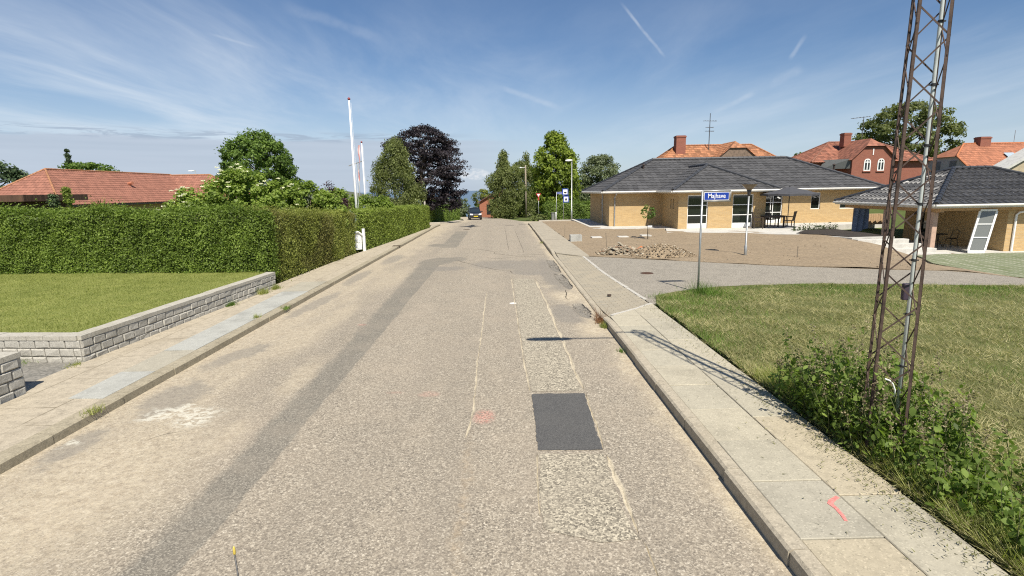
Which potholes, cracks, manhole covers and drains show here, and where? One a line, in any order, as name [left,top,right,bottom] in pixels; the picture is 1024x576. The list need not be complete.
pothole [572,304,592,318]
pothole [554,274,573,289]
